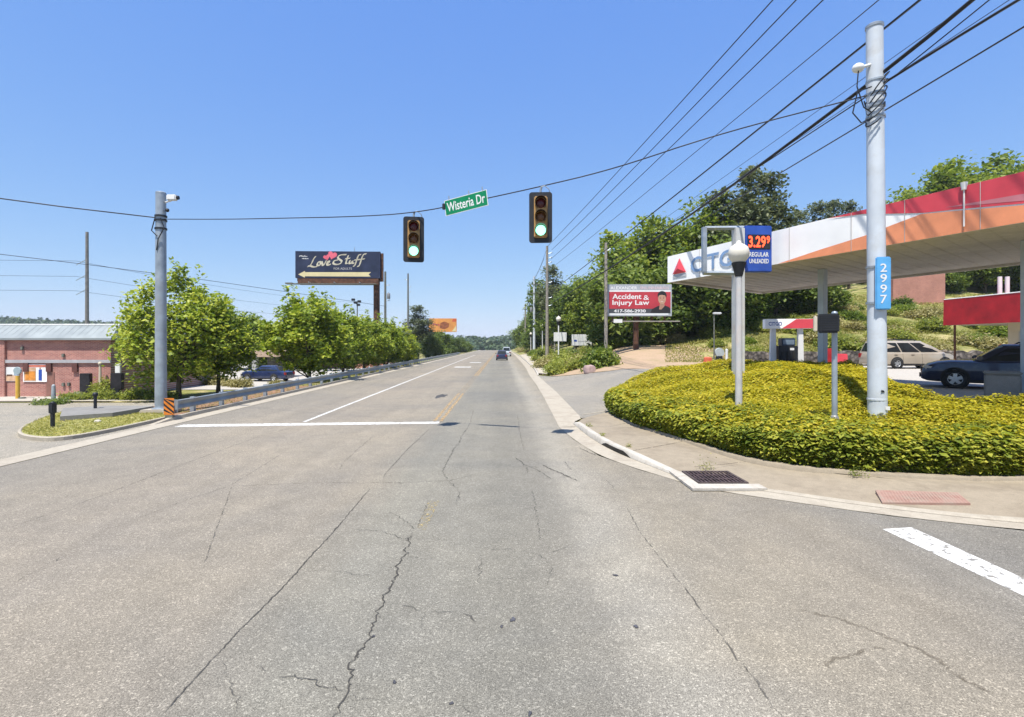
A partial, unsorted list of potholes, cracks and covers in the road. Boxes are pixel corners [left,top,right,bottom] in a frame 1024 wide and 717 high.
drain grate [669,471,767,491]
crack [162,437,471,717]
